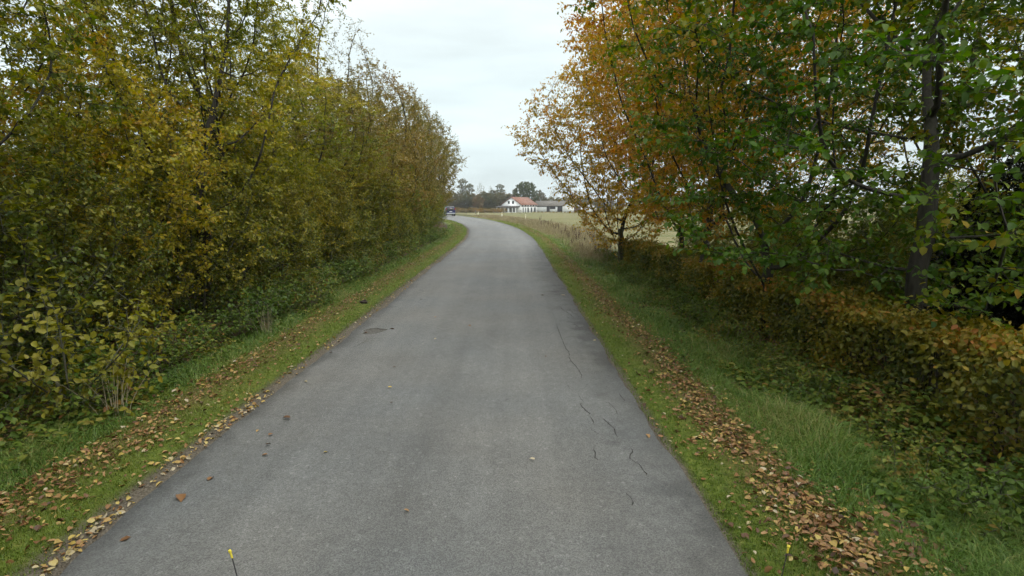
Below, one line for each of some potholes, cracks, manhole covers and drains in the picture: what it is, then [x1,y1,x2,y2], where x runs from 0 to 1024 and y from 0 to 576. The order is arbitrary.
crack [579,395,647,476]
